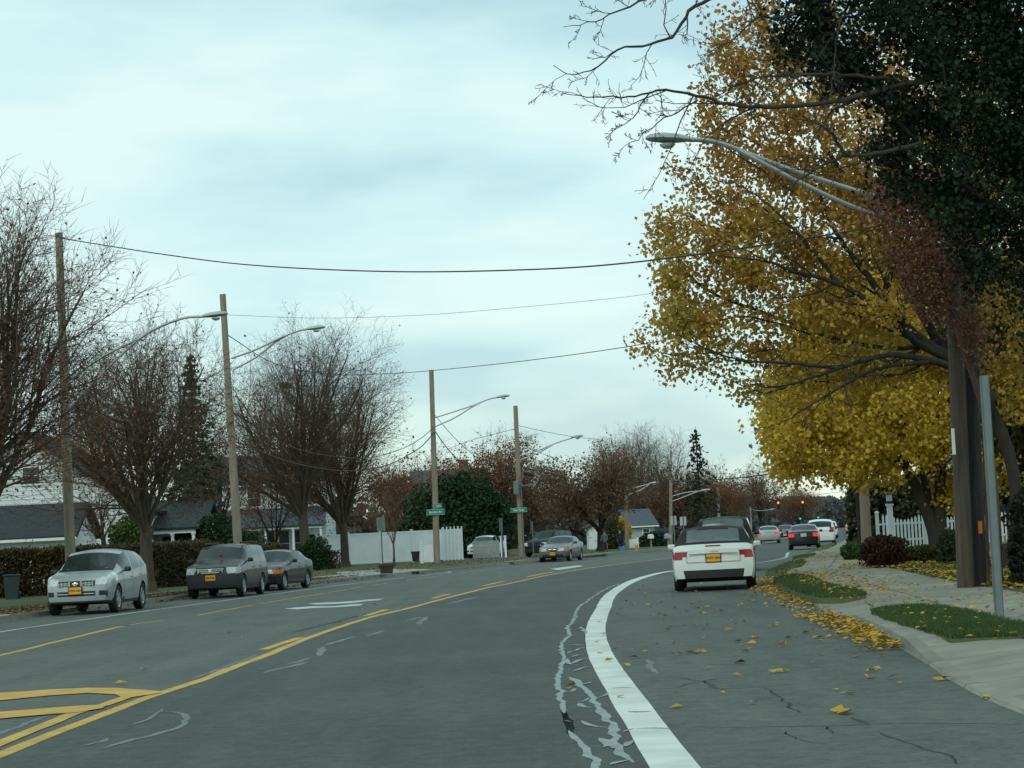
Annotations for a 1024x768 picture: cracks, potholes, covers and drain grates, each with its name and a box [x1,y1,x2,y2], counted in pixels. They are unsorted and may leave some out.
crack [671,664,1024,764]
